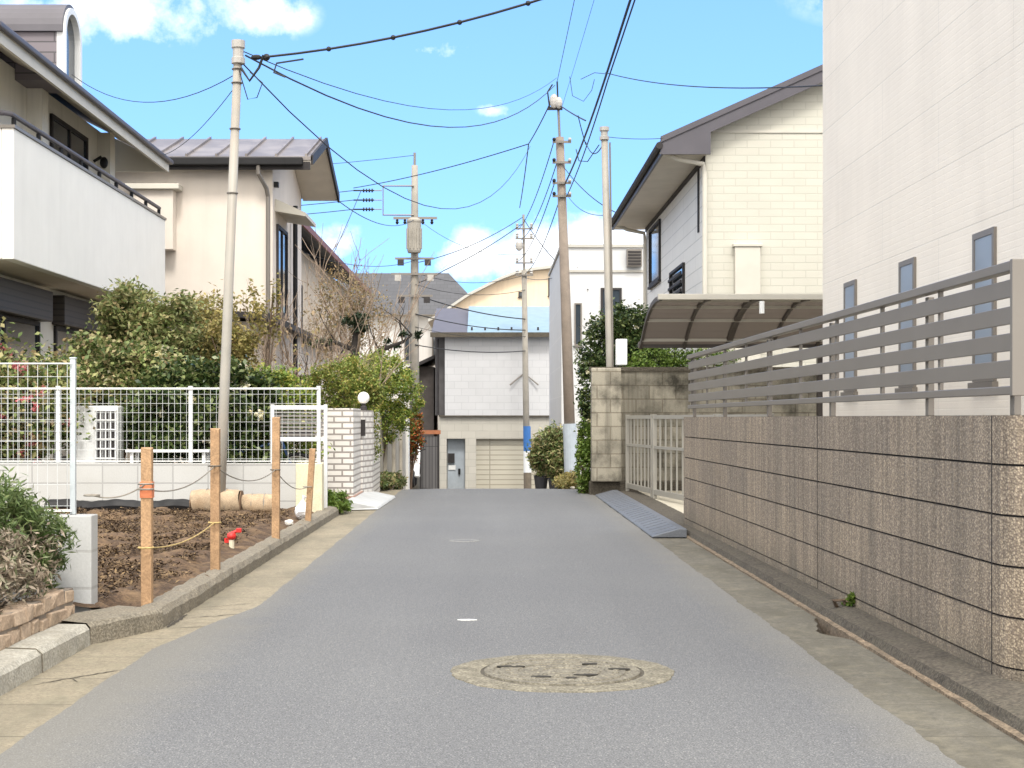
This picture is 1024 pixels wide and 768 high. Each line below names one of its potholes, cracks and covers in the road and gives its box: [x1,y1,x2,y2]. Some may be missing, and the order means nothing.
manhole cover [450,654,675,693]
